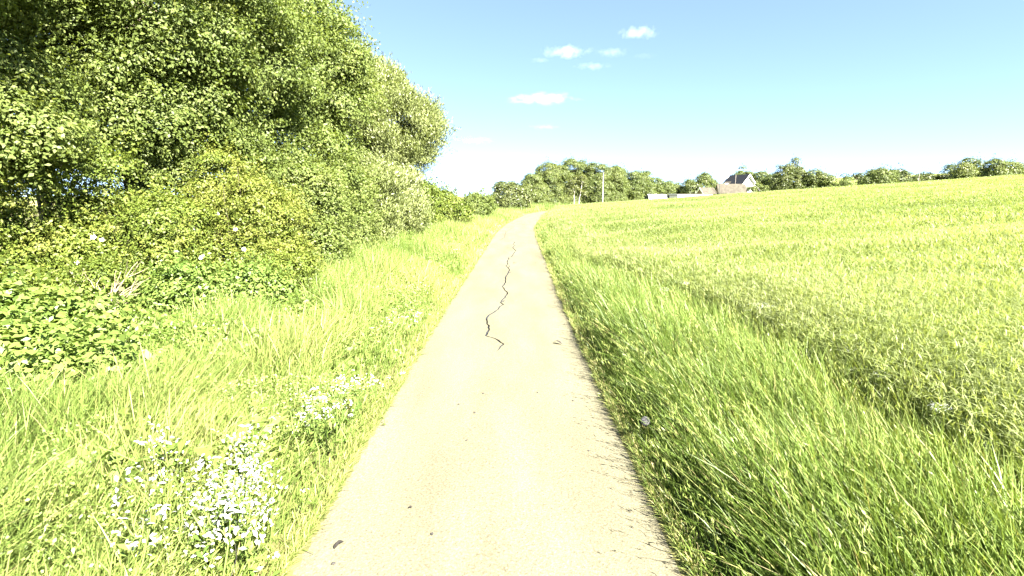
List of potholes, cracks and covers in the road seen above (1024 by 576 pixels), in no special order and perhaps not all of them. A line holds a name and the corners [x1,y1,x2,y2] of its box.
crack [485,228,516,351]
